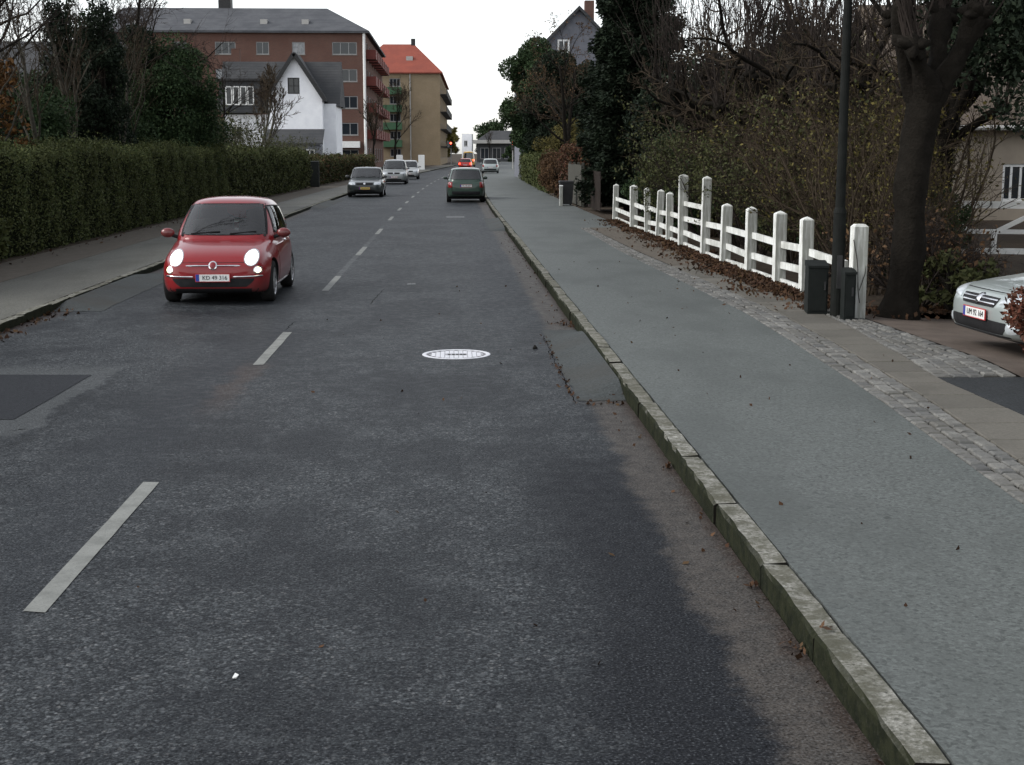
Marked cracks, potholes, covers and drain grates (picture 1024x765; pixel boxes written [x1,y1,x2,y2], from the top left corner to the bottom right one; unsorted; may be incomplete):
manhole cover [422,349,490,359]
crack [546,342,619,406]
